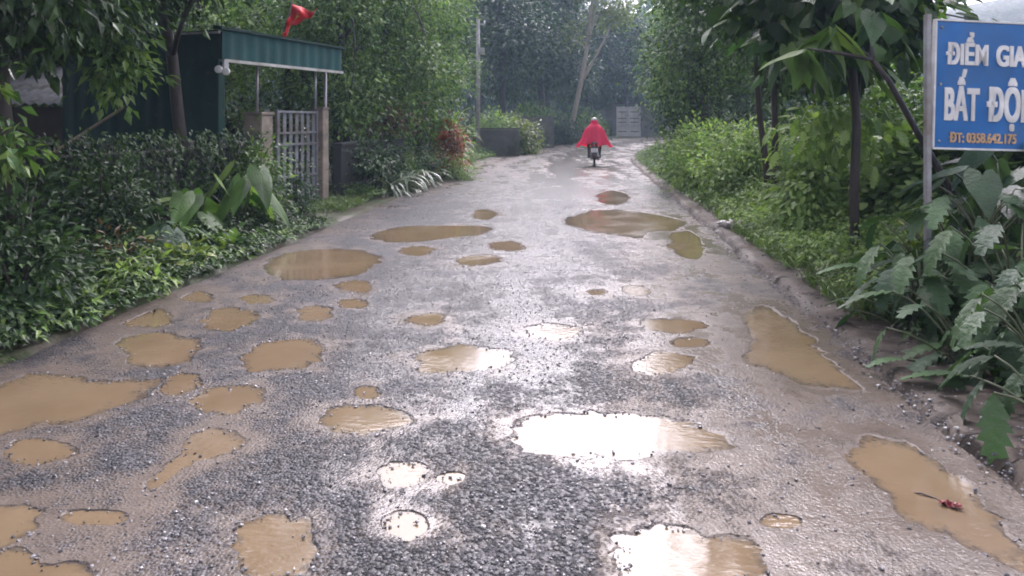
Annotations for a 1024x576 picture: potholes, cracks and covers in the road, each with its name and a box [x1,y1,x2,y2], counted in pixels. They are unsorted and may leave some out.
pothole [315,403,418,436]
pothole [368,224,498,243]
pothole [113,329,205,368]
pothole [261,247,387,281]
pothole [435,471,466,485]
pothole [375,460,431,489]
pothole [412,343,519,374]
pothole [500,409,738,461]
pothole [840,433,1024,574]
pothole [0,371,167,436]
pothole [380,509,430,541]
pothole [1,437,81,466]
